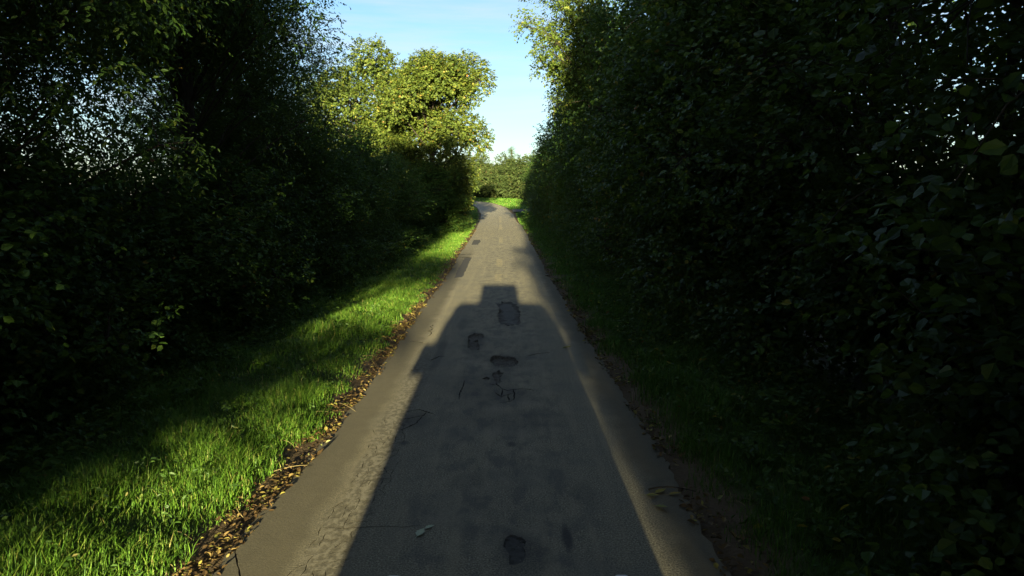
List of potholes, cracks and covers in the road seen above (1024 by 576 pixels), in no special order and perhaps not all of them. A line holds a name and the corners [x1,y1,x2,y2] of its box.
pothole [490,355,518,367]
pothole [503,535,526,565]
pothole [495,301,521,326]
crack [492,383,531,403]
pothole [467,333,484,350]
